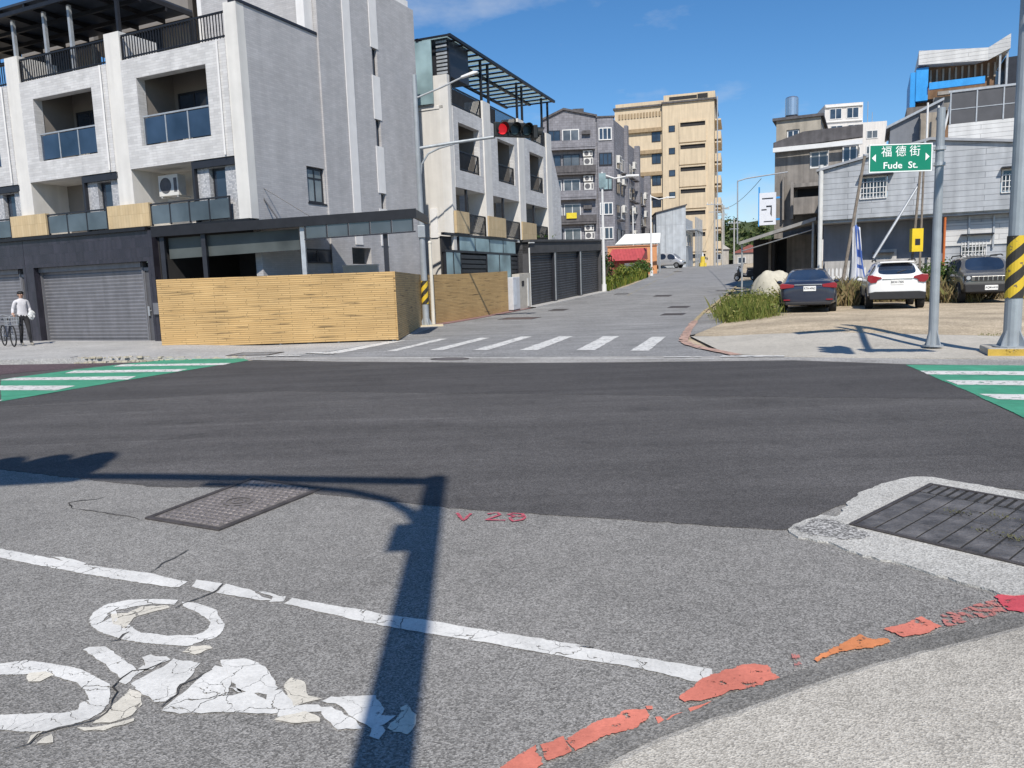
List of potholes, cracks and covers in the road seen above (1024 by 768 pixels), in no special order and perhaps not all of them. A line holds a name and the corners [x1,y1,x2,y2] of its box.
crack [68,497,138,519]
manhole cover [145,477,325,531]
drain grate [849,483,1024,566]
